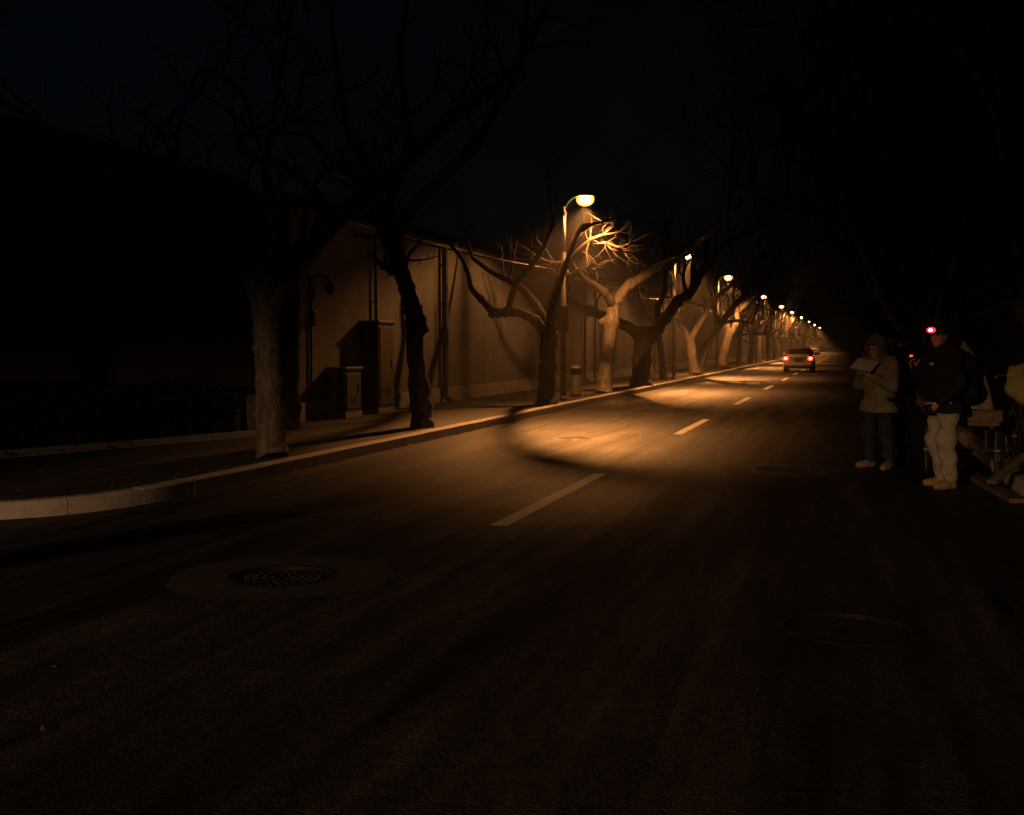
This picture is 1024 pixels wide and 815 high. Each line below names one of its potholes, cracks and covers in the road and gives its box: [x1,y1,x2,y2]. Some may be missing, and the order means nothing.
manhole cover [720,463,846,477]
manhole cover [164,555,395,600]
manhole cover [779,612,917,646]
